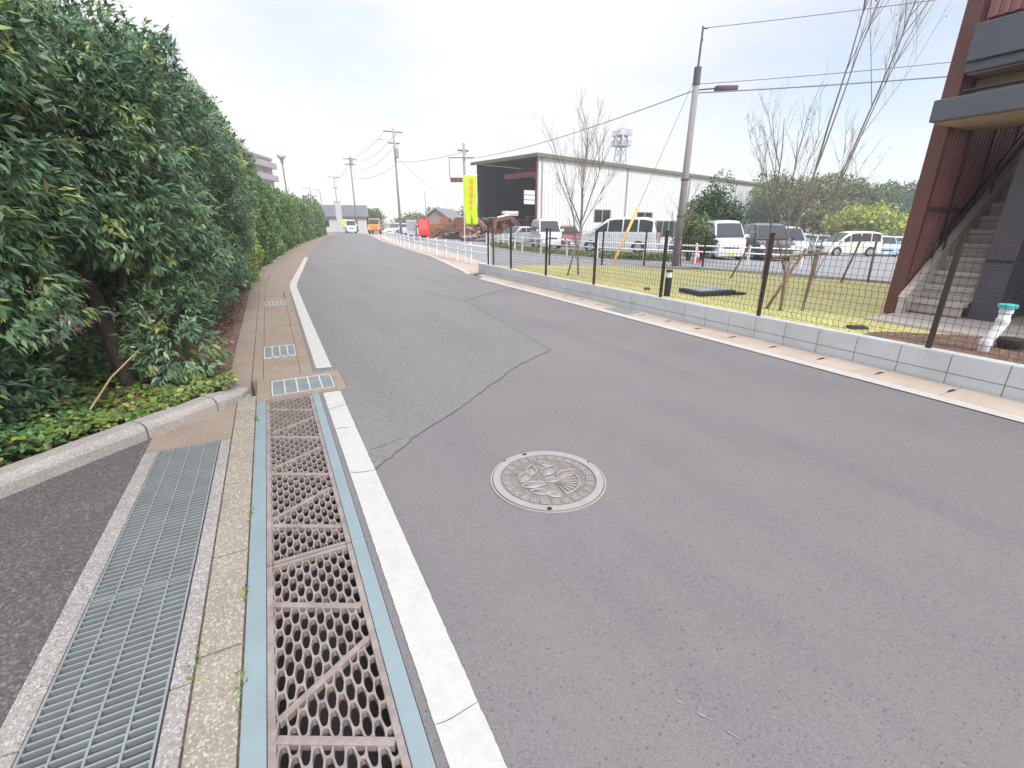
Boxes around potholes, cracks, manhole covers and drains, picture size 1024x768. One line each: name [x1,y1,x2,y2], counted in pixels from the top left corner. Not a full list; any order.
drain grate [267,543,412,768]
manhole cover [490,451,606,514]
drain grate [12,574,193,768]
drain grate [264,344,297,359]
drain grate [271,373,335,396]
crack [369,350,551,469]
drain grate [89,440,220,602]
drain grate [266,394,351,567]
